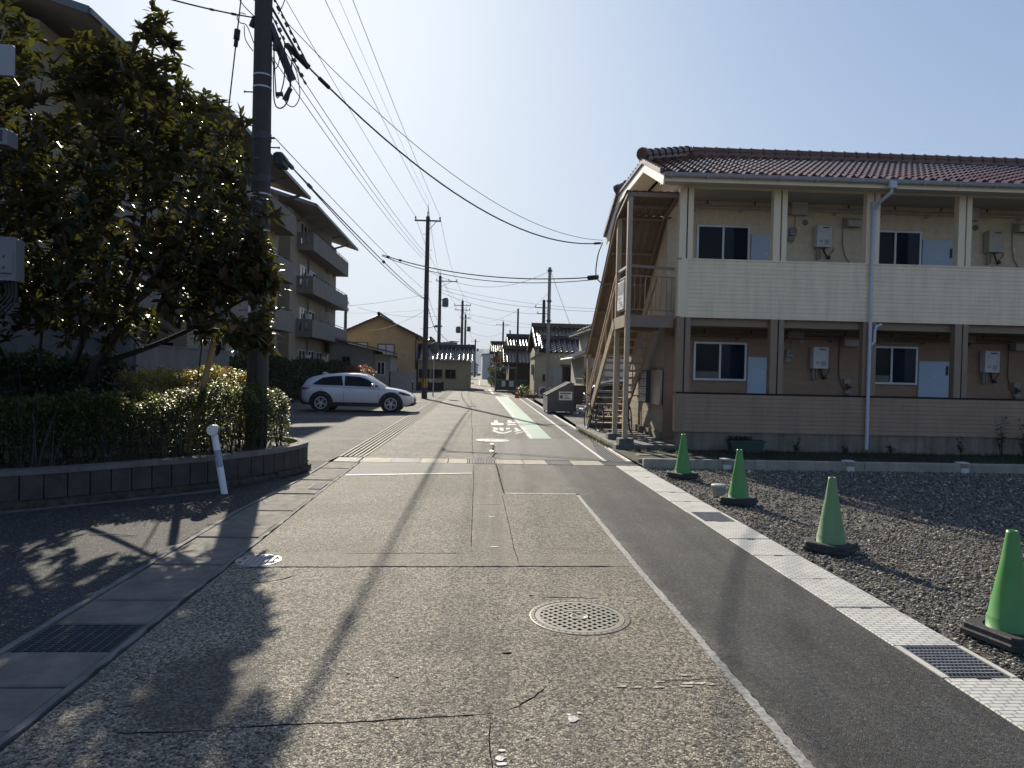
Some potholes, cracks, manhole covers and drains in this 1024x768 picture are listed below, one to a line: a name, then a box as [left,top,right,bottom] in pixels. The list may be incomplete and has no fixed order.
manhole cover [529,600,630,636]
drain grate [691,512,735,522]
manhole cover [235,554,282,567]
drain grate [6,624,146,653]
crack [227,686,546,768]
drain grate [903,647,1010,678]
